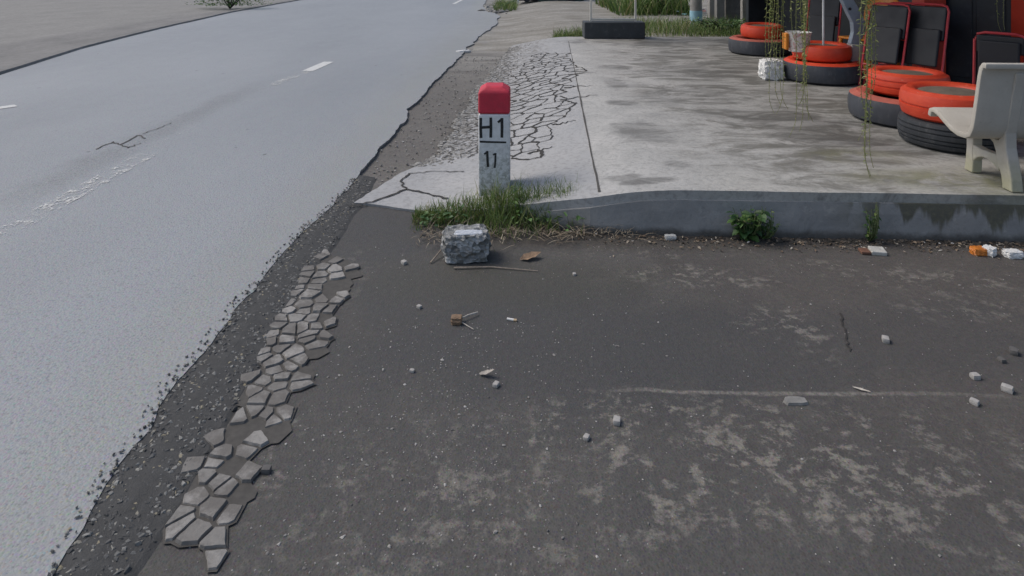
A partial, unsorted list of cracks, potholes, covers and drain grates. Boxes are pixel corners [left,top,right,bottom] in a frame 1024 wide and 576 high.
crack [97,125,165,149]
crack [163,254,362,572]
crack [839,313,851,351]
crack [349,52,594,207]
